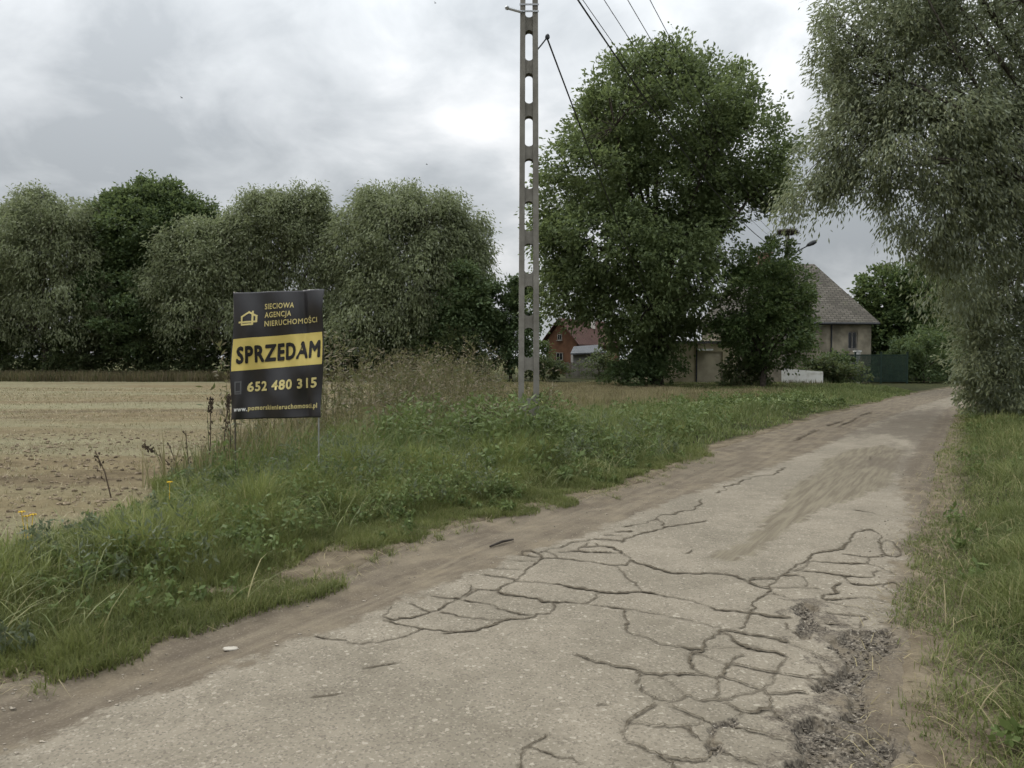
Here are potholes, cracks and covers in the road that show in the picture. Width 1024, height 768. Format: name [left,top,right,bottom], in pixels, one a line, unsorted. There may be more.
pothole [772,711,917,768]
crack [576,529,901,766]
pothole [784,600,835,643]
crack [519,734,581,768]
crack [625,467,785,535]
pothole [801,627,911,730]
crack [316,530,791,644]
